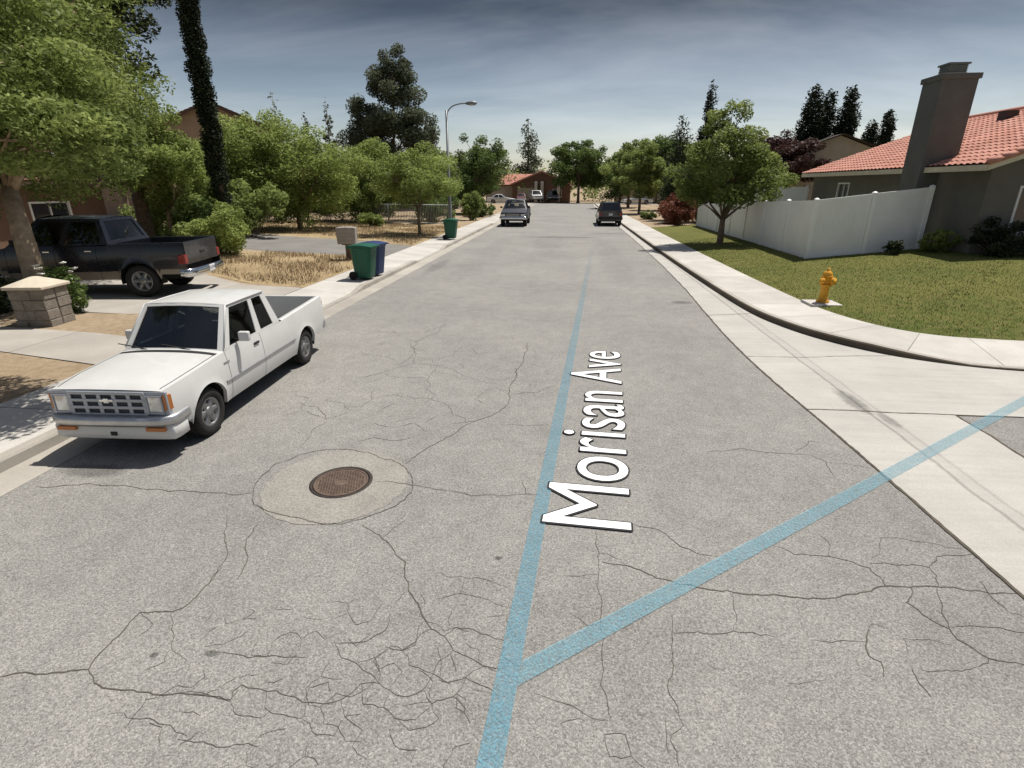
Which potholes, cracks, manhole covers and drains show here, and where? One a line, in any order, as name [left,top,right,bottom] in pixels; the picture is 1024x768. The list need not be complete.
manhole cover [309,466,373,498]
crack [0,515,516,768]
crack [539,524,1024,766]
